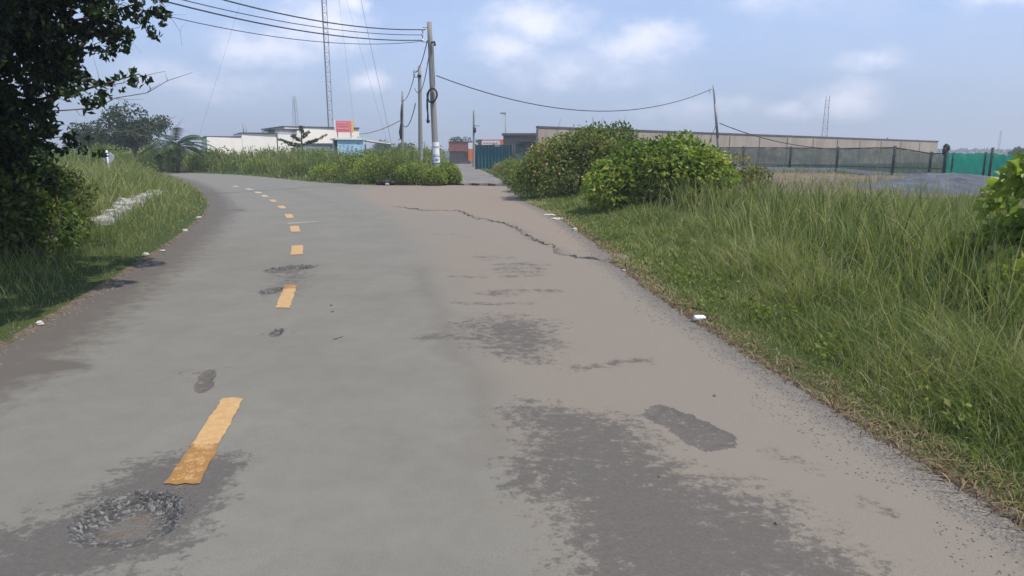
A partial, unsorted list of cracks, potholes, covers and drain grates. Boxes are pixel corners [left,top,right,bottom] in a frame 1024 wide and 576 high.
pothole [263,264,318,273]
pothole [52,485,197,556]
pothole [259,287,283,295]
crack [393,206,605,261]
